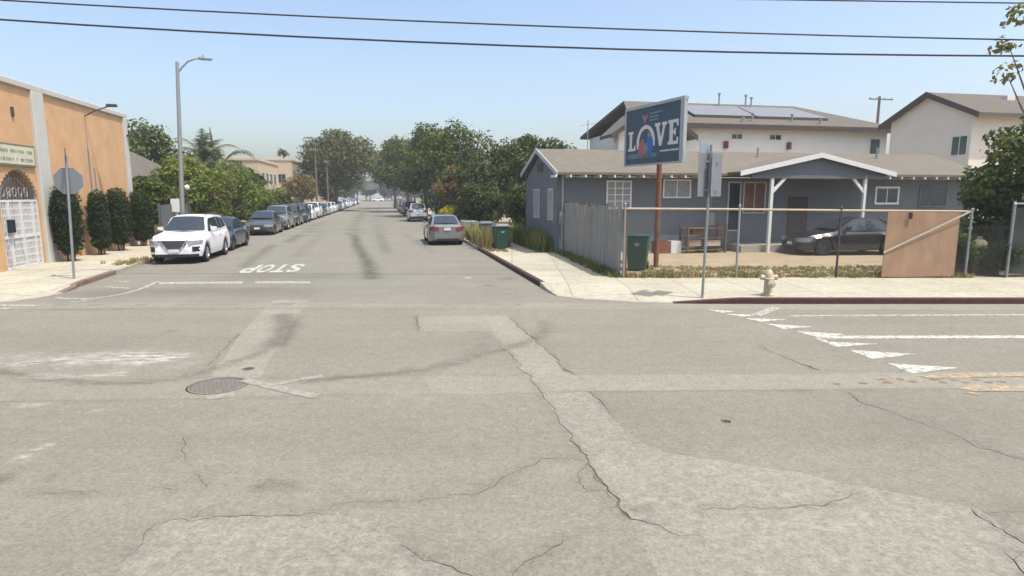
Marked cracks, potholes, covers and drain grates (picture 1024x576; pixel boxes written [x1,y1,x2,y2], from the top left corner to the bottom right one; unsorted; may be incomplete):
crack [703,493,859,510]
crack [512,320,574,375]
crack [851,395,1024,460]
manhole cover [187,377,248,395]
crack [401,545,472,576]
crack [325,339,698,536]
crack [971,509,1024,574]
crack [128,438,324,557]
